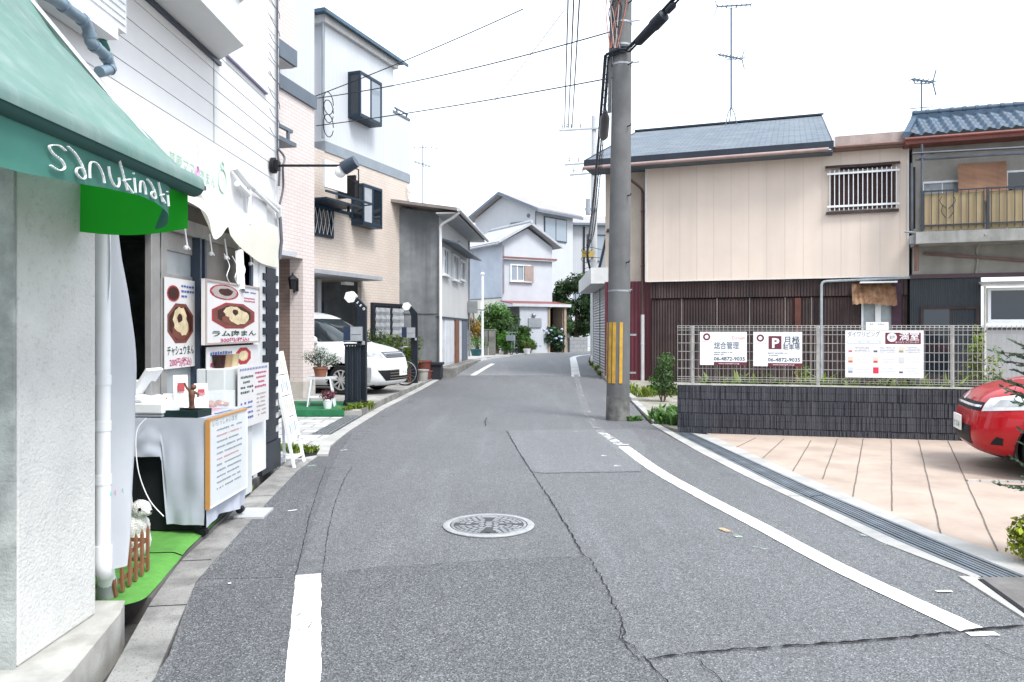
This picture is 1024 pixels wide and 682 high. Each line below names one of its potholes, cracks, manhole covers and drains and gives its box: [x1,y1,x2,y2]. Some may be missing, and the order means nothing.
crack [462,419,1024,682]
drain grate [674,432,1024,577]
manhole cover [443,513,534,538]
